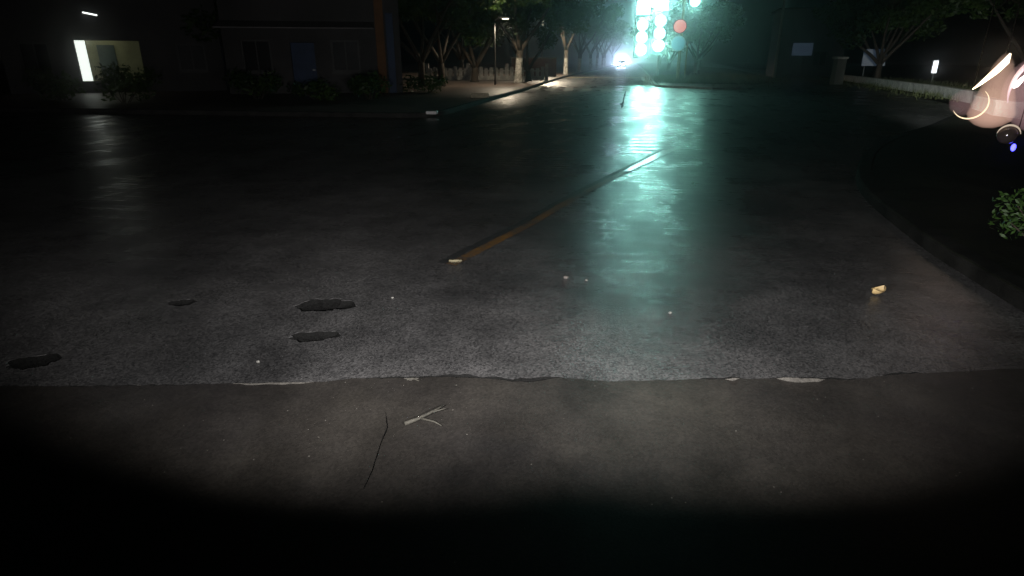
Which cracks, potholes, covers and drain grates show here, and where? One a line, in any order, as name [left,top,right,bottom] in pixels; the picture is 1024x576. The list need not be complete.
pothole [5,353,63,370]
crack [363,416,388,489]
pothole [294,298,357,312]
pothole [288,331,341,342]
